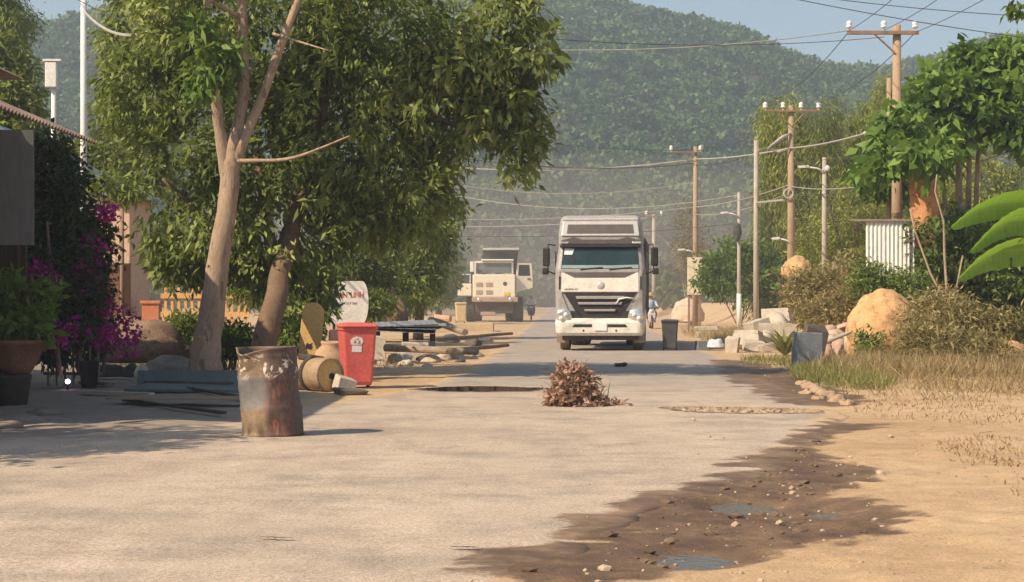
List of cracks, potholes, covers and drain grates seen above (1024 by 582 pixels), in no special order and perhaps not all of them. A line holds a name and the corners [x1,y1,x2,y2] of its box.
pothole [660,406,825,414]
